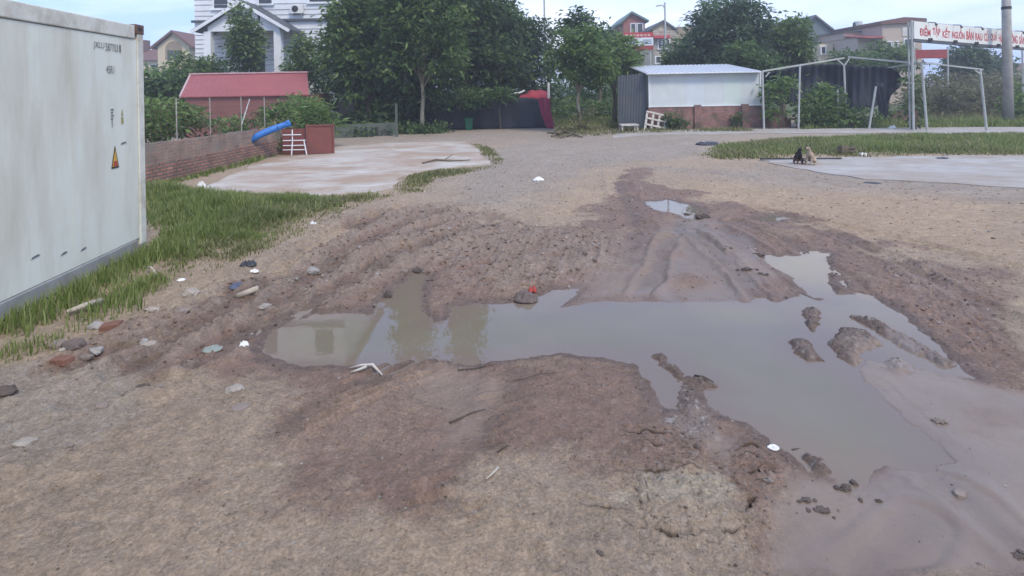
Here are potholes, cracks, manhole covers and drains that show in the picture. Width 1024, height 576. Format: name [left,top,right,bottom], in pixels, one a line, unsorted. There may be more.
pothole [632,198,718,222]
pothole [235,263,1012,512]
pothole [750,243,852,292]
